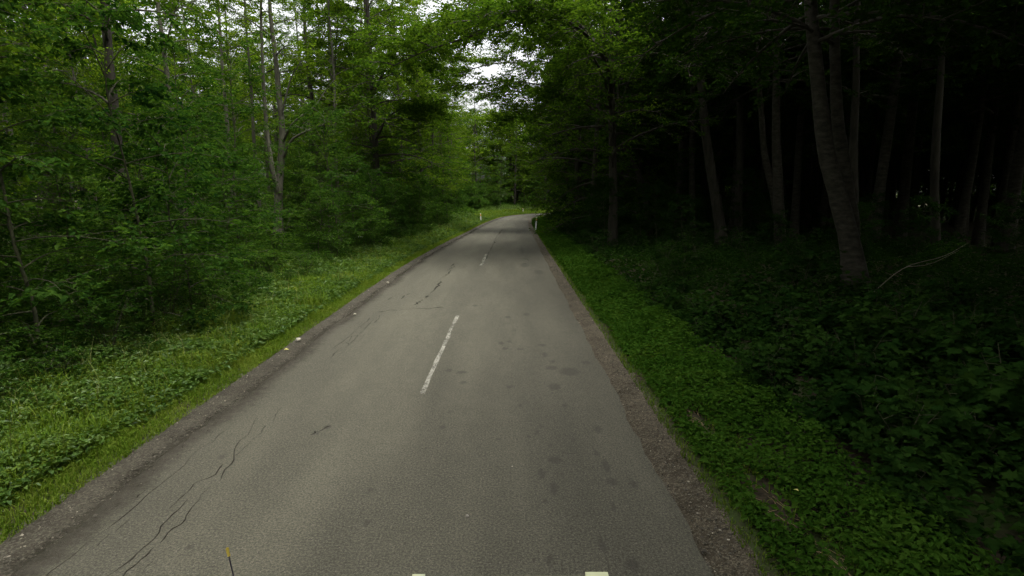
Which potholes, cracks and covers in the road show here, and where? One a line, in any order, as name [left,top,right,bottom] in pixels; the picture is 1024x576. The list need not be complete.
crack [332,264,453,356]
crack [46,407,282,576]
